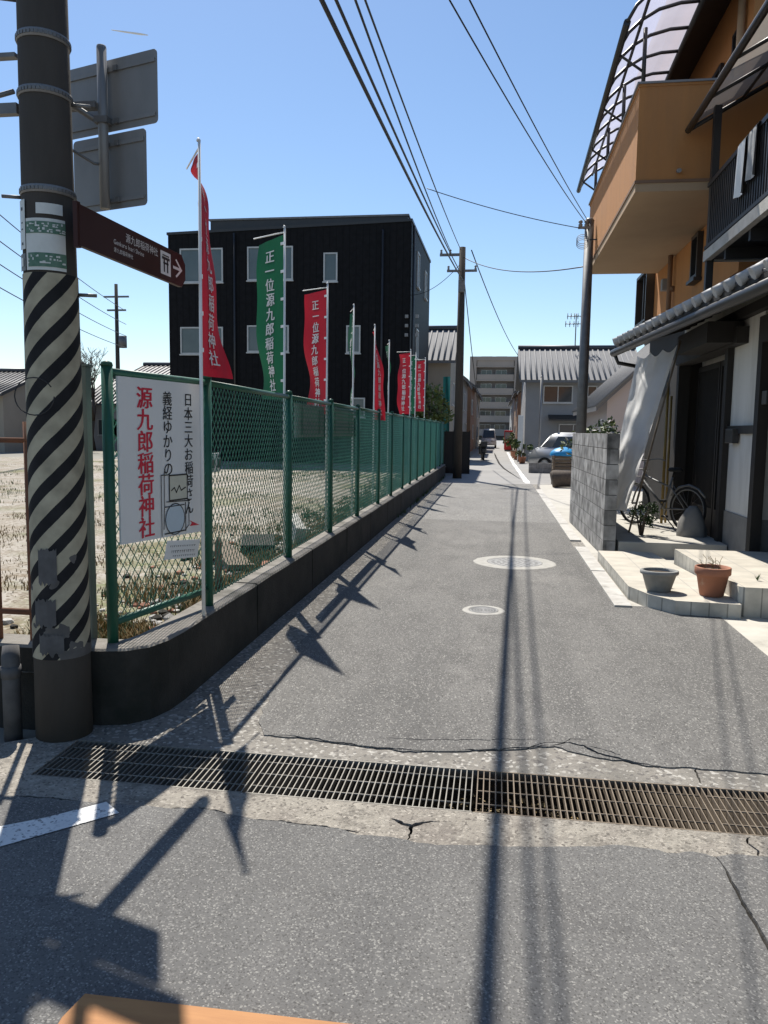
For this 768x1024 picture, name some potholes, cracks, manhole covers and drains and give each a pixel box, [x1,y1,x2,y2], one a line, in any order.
drain grate [699,787,768,837]
crack [726,873,768,950]
drain grate [245,754,474,812]
drain grate [34,740,269,793]
manhole cover [462,605,505,615]
drain grate [475,770,722,833]
manhole cover [473,556,556,570]
